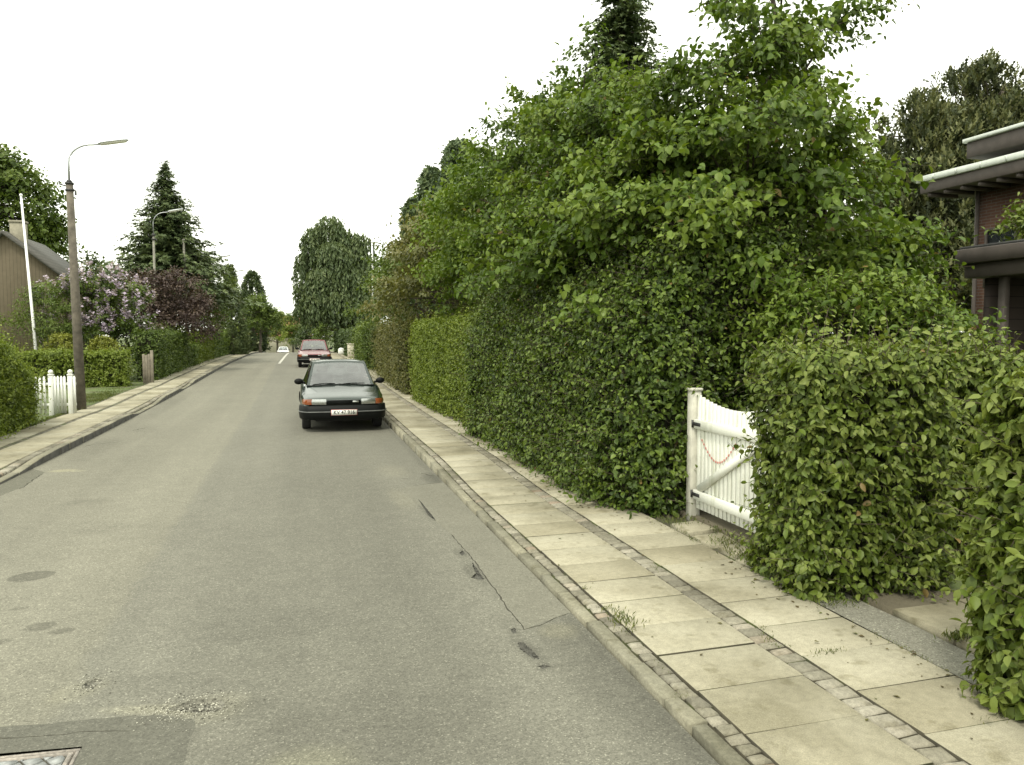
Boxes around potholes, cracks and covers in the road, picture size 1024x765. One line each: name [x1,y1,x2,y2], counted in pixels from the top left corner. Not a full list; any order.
pothole [64,671,116,702]
pothole [518,642,539,659]
pothole [109,685,265,732]
manhole cover [0,748,81,765]
